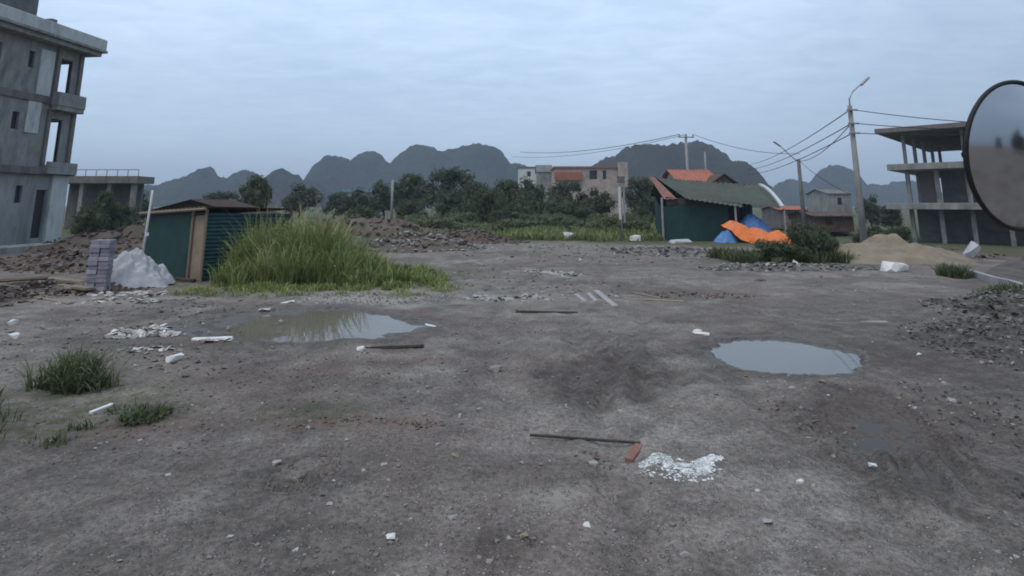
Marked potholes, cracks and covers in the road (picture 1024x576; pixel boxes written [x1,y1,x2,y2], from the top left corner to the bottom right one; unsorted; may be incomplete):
pothole [171,305,445,345]
pothole [802,387,1016,510]
pothole [686,334,883,377]
